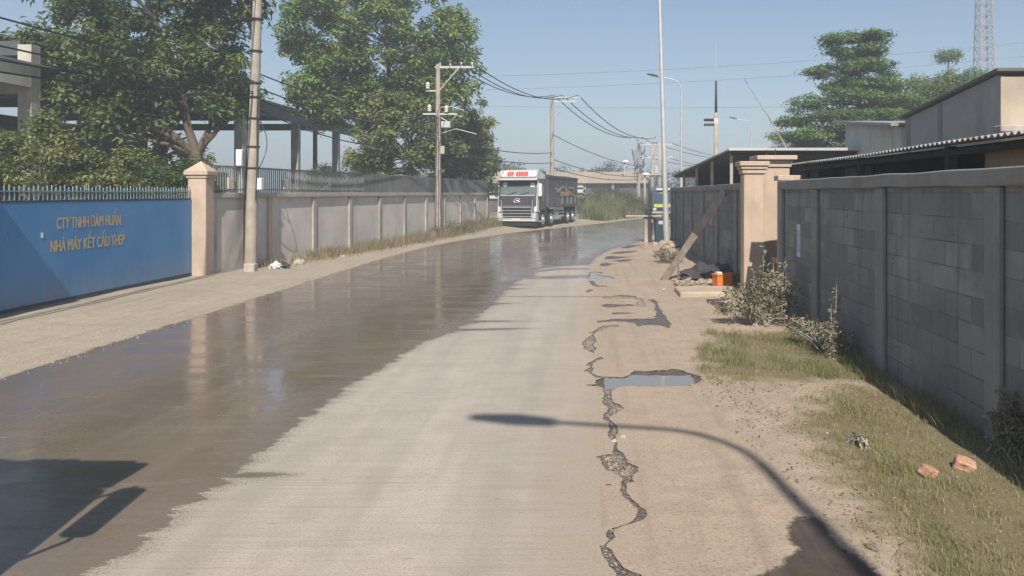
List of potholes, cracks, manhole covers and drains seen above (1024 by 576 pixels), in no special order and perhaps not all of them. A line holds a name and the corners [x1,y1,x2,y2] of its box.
pothole [588,369,702,390]
crack [495,281,647,576]
pothole [598,299,672,328]
pothole [586,272,614,280]
